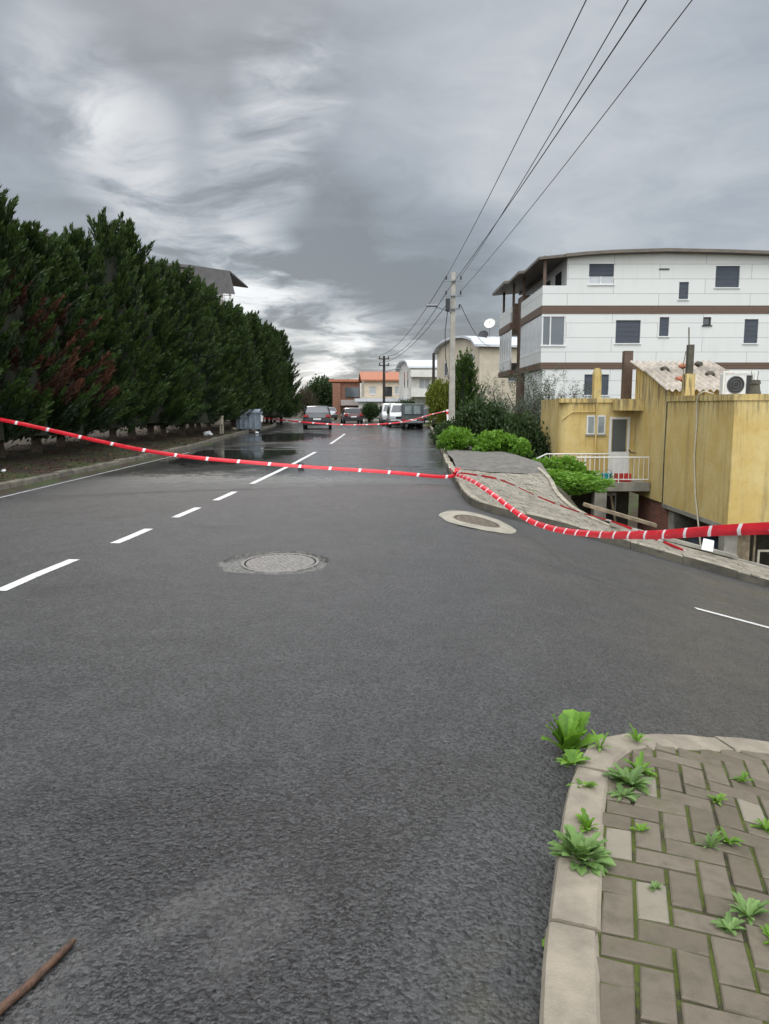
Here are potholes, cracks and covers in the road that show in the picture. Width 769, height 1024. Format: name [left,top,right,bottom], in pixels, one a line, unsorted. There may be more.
manhole cover [241,553,319,573]
manhole cover [439,511,517,534]
